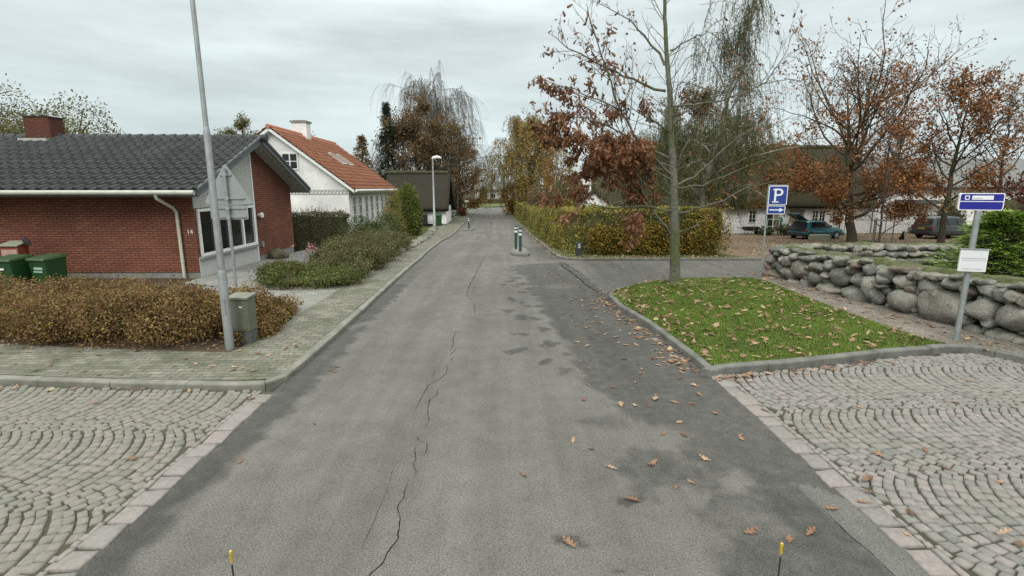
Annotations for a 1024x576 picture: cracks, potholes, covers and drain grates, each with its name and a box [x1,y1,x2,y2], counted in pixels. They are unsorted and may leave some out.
crack [362,334,456,576]
